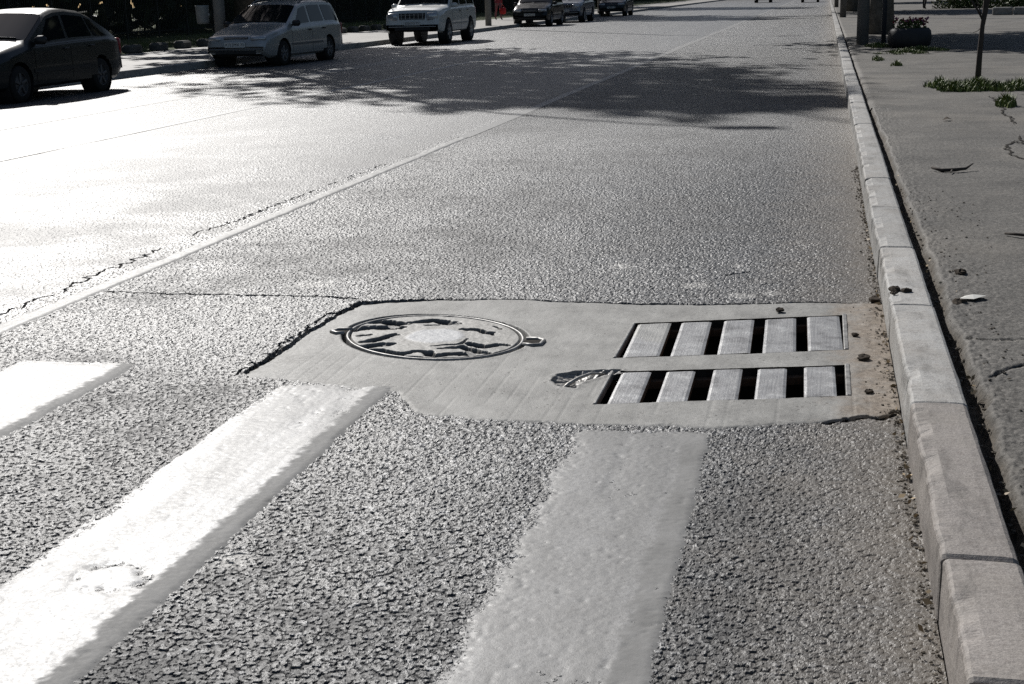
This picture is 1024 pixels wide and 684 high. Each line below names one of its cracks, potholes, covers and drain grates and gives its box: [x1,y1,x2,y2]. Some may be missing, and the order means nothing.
crack [827,413,899,425]
crack [988,96,1024,159]
crack [238,298,453,375]
manhole cover [330,315,546,361]
drain grate [613,314,849,358]
drain grate [592,363,852,404]
